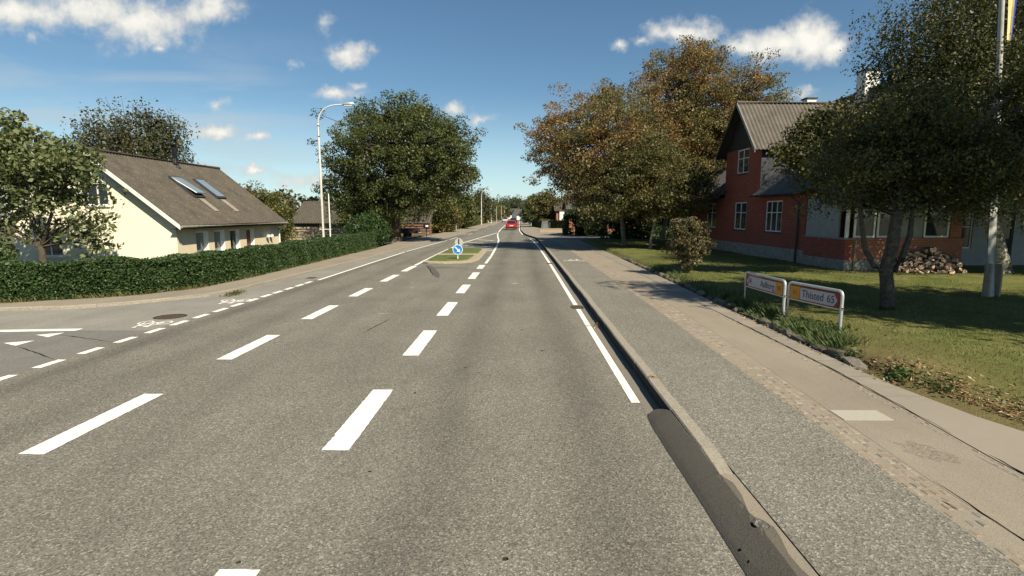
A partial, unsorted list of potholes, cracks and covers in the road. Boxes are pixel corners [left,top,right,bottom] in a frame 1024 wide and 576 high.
crack [19,335,112,359]
